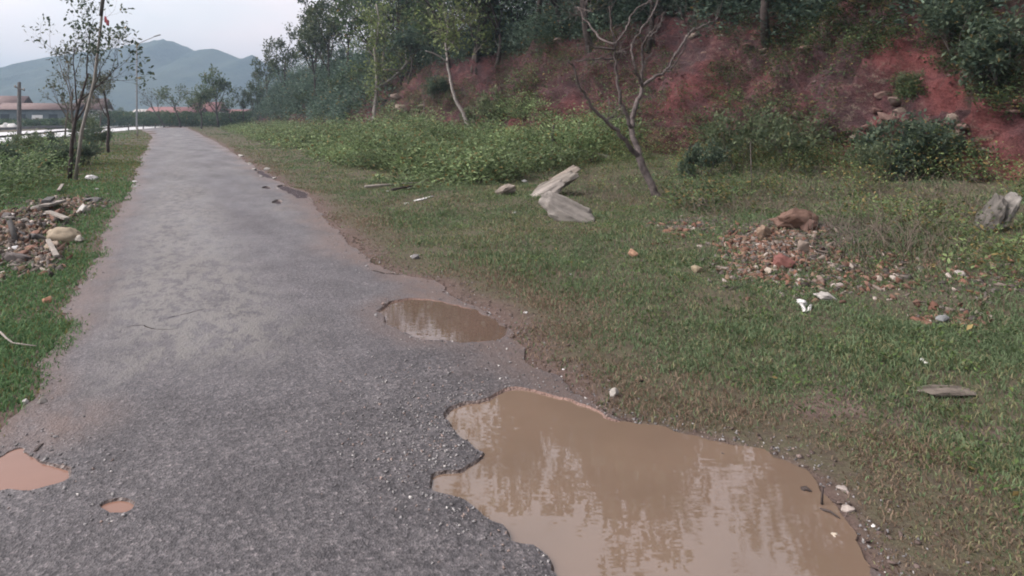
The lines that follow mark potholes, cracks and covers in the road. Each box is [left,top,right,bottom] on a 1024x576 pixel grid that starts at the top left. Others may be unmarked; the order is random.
pothole [100,497,135,512]
pothole [278,185,308,198]
pothole [376,298,507,343]
pothole [0,447,71,490]
pothole [429,386,871,576]
